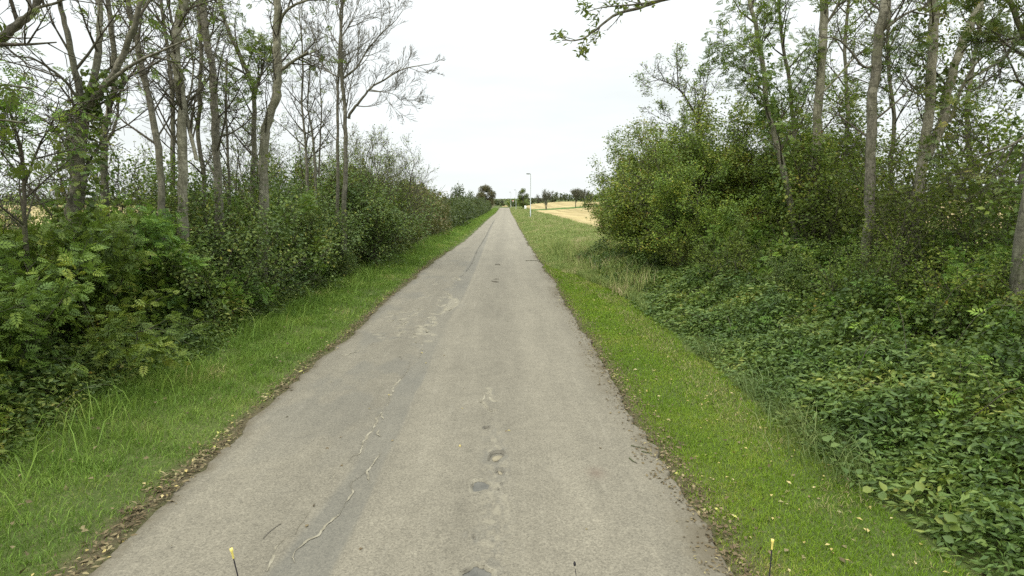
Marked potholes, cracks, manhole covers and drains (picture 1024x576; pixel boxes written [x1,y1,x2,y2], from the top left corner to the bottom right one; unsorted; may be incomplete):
crack [263,223,493,571]
pothole [469,478,493,493]
pothole [455,561,497,576]
pothole [486,449,506,463]
